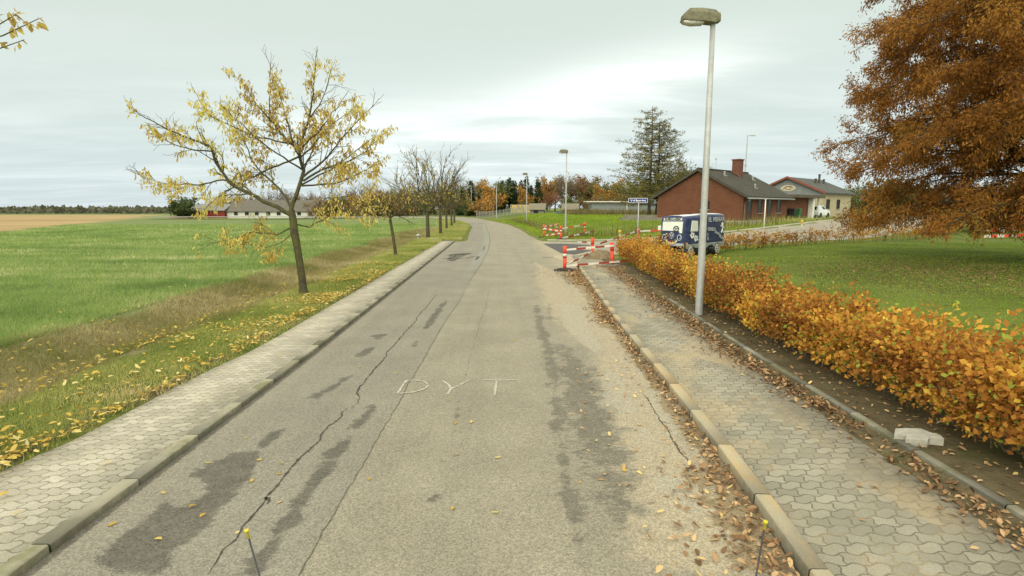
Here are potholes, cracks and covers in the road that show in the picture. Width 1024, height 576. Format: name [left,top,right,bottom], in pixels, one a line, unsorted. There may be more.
crack [208,295,436,574]
crack [643,393,689,460]
